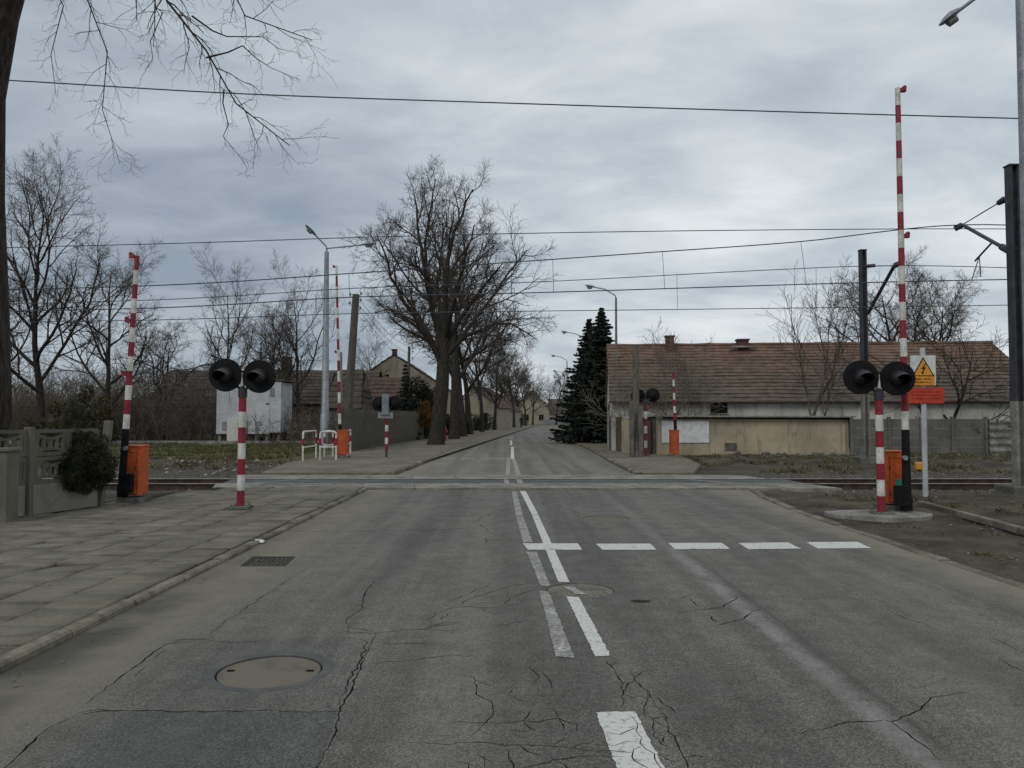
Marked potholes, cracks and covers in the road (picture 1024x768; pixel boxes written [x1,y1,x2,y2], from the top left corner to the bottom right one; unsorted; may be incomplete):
crack [316,580,533,768]
drain grate [241,556,296,566]
manhole cover [545,582,615,597]
crack [679,596,761,627]
manhole cover [202,652,334,692]
crack [800,692,963,760]
crack [409,661,703,768]
